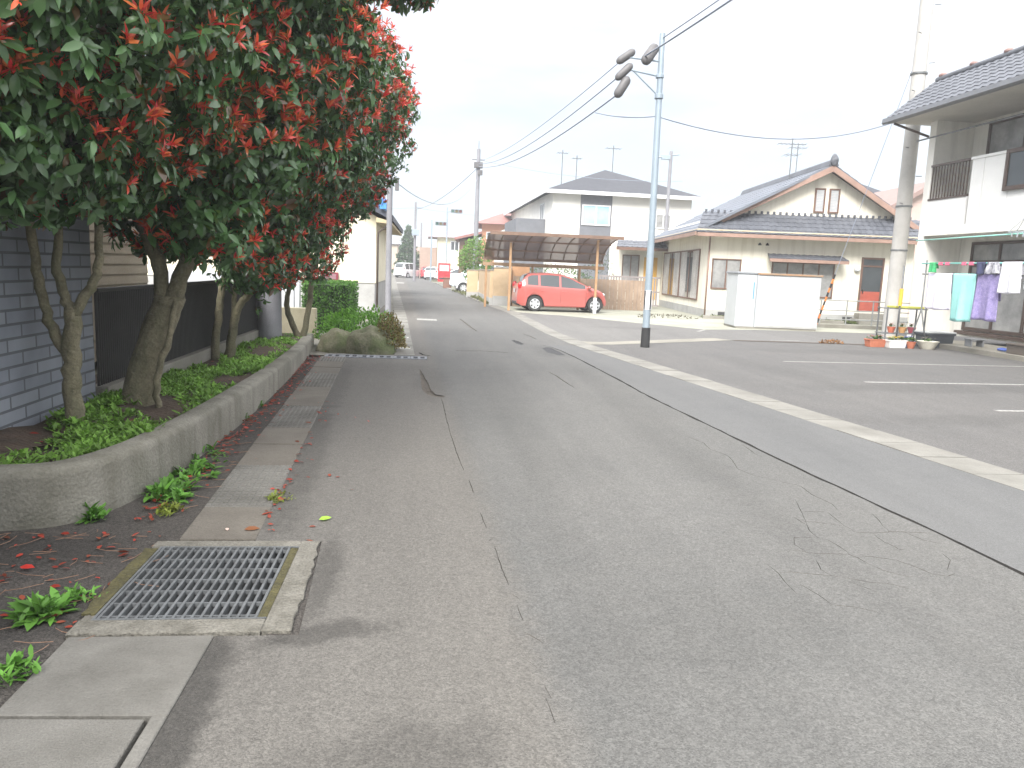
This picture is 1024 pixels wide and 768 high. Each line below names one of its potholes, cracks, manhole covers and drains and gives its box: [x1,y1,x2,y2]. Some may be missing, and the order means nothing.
crack [442,402,555,722]
drain grate [65,541,320,639]
crack [524,334,1024,612]
